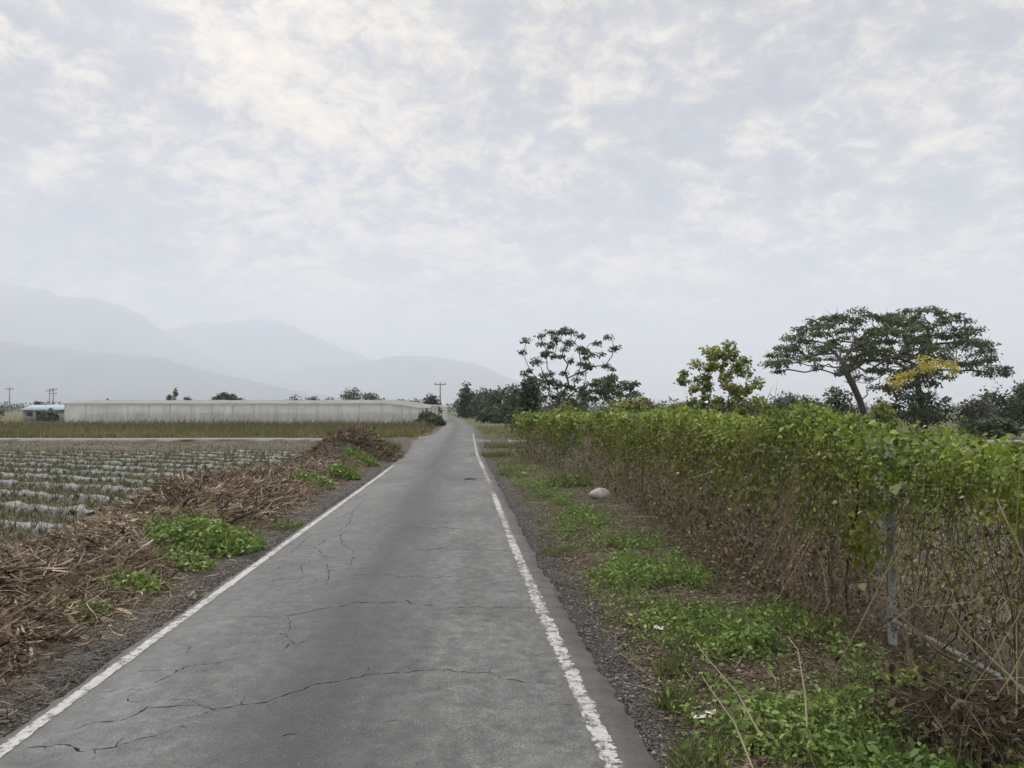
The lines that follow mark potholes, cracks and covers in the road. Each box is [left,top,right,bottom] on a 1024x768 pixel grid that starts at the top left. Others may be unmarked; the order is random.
crack [249,599,528,651]
crack [256,506,470,587]
crack [22,643,557,760]
